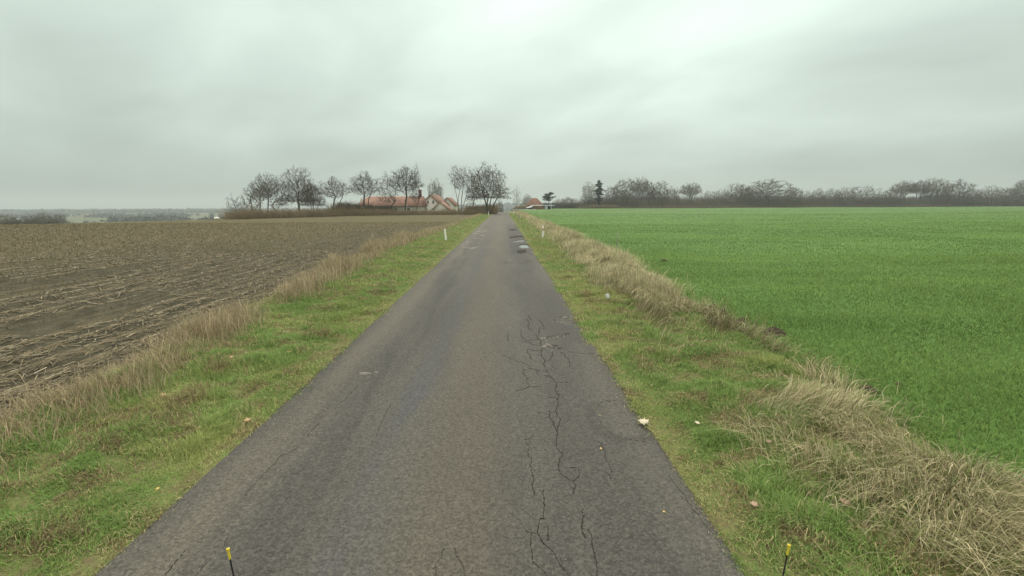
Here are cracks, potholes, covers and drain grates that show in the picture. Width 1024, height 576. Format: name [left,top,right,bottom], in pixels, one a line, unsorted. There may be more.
crack [581,509,598,576]
crack [507,316,580,576]
